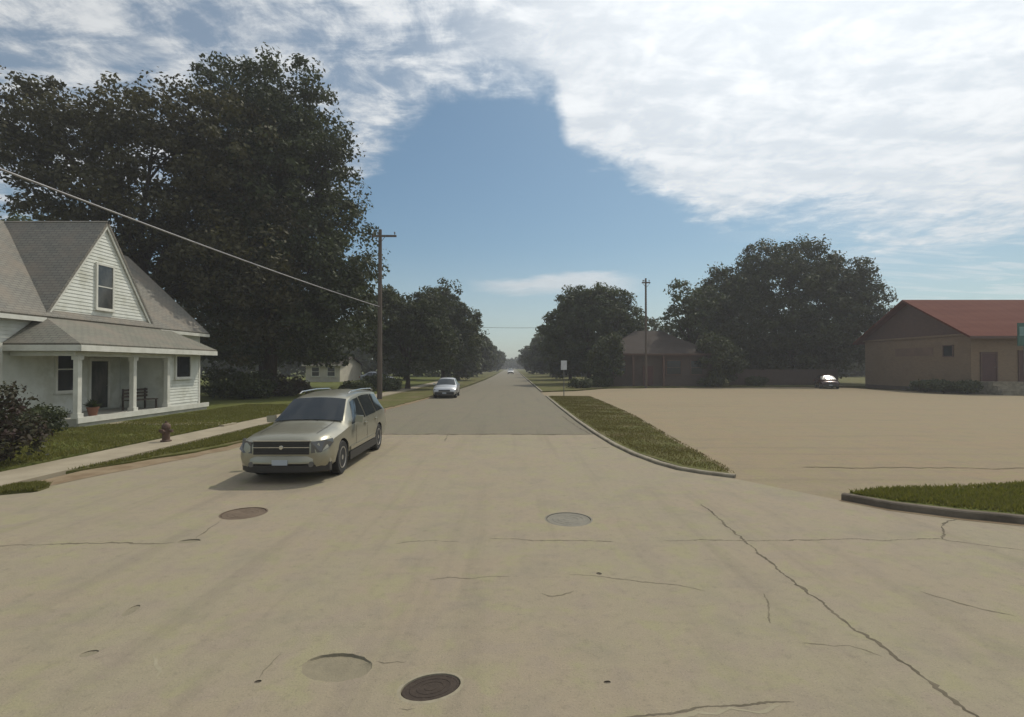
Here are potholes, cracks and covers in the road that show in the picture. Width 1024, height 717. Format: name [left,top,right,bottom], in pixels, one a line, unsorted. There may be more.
crack [940,519,957,539]
manhole cover [218,507,268,520]
manhole cover [397,672,464,704]
crack [926,593,1014,616]
crack [808,643,878,655]
manhole cover [545,512,593,527]
pothole [301,653,372,682]
